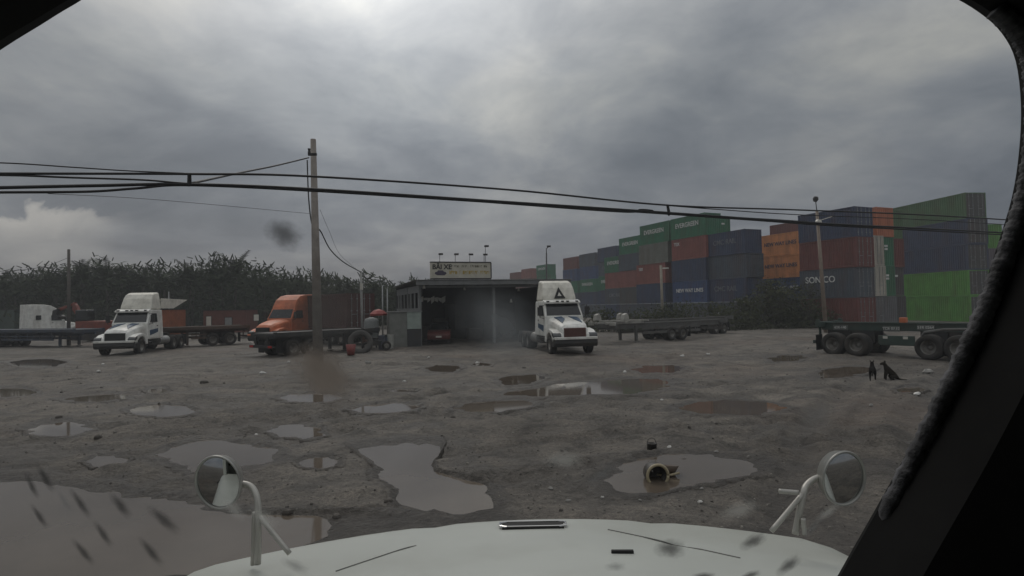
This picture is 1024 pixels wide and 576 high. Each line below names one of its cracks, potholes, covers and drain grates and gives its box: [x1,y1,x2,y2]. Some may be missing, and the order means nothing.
pothole [418,364,467,373]
pothole [444,396,544,416]
pothole [269,391,353,404]
pothole [341,400,429,416]
pothole [0,385,43,399]
pothole [120,402,204,419]
